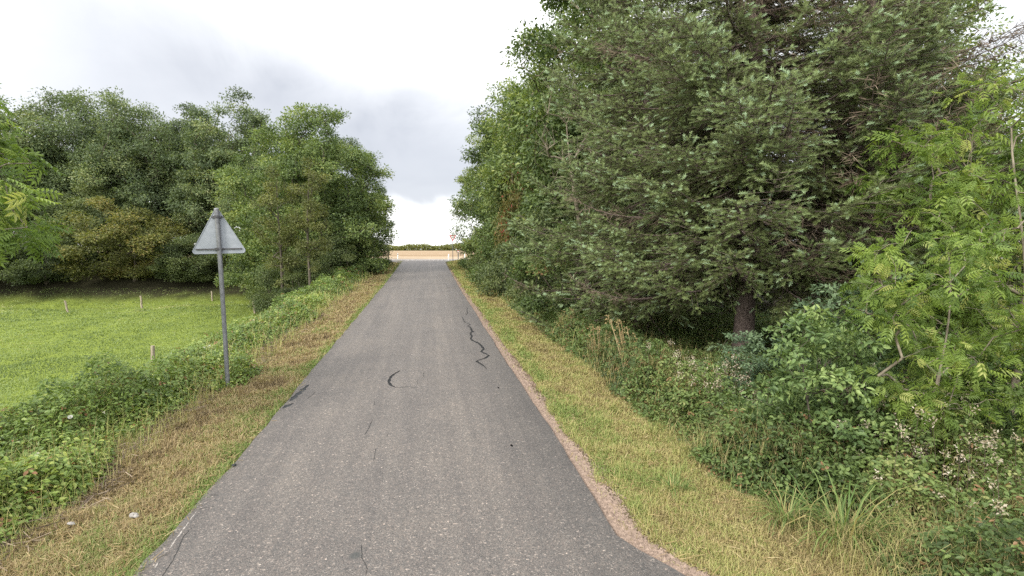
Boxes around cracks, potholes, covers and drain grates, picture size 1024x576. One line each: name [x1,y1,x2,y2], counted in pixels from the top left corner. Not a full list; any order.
crack [365,370,424,459]
crack [154,506,213,576]
crack [283,385,316,408]
crack [462,308,490,369]
